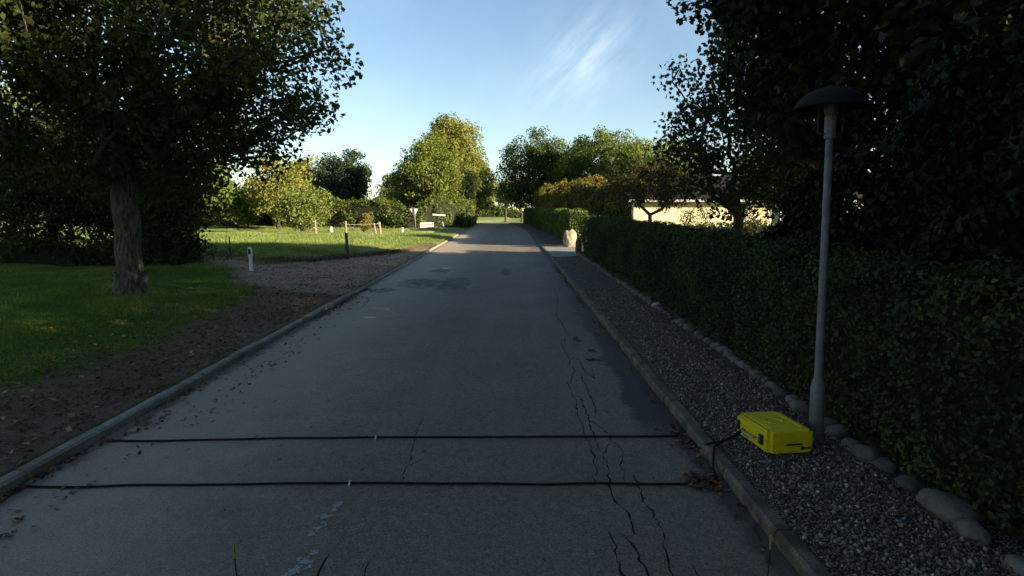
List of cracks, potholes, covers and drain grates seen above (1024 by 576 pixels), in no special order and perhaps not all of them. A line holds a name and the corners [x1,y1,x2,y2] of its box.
crack [553,284,698,576]
